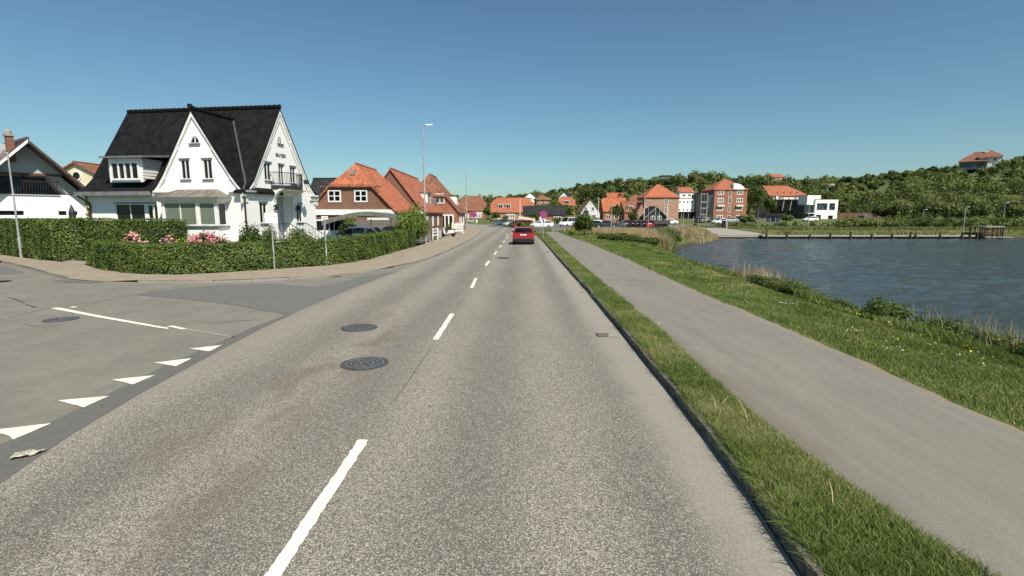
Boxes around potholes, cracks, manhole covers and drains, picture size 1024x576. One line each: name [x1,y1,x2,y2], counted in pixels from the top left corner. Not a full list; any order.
manhole cover [340,357,389,371]
manhole cover [341,324,378,332]
